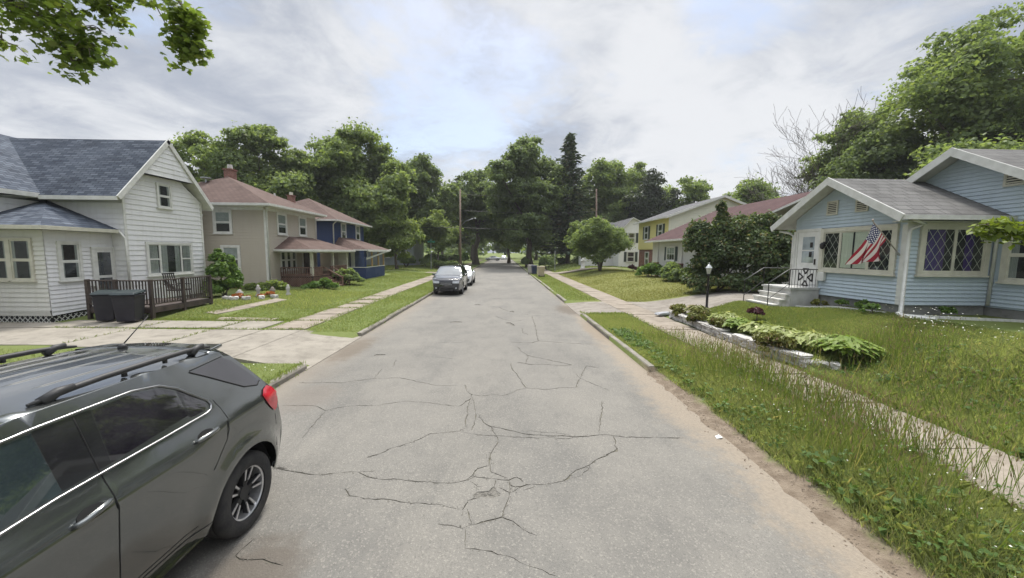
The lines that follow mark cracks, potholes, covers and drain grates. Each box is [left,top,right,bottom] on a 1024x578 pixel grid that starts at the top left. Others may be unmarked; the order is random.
crack [489,298,610,391]
crack [276,362,677,576]
